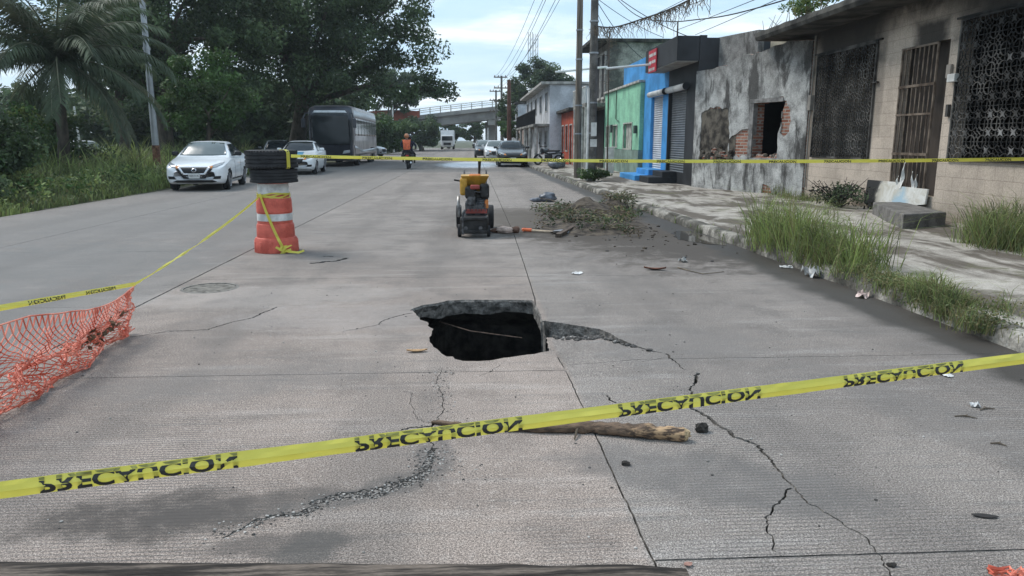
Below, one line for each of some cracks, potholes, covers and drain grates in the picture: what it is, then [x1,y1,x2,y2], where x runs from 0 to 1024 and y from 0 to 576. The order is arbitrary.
crack [542,321,891,576]
manhole cover [180,283,239,294]
crack [310,256,348,264]
crack [202,365,507,545]
pothole [411,300,543,361]
crack [127,307,277,338]
